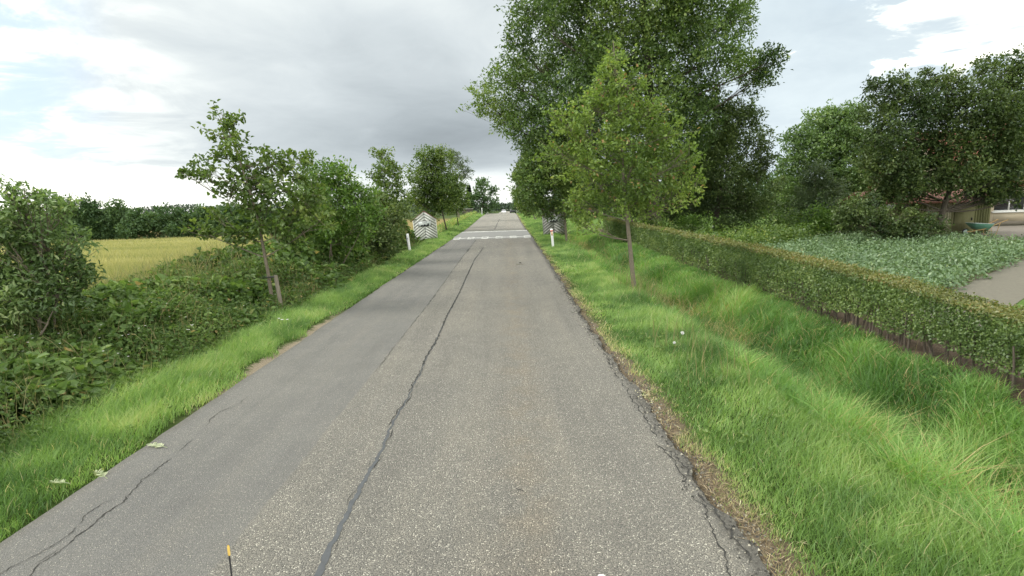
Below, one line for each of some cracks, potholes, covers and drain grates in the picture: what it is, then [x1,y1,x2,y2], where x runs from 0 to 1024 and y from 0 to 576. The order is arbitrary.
crack [376,240,476,370]
crack [1,440,192,576]
